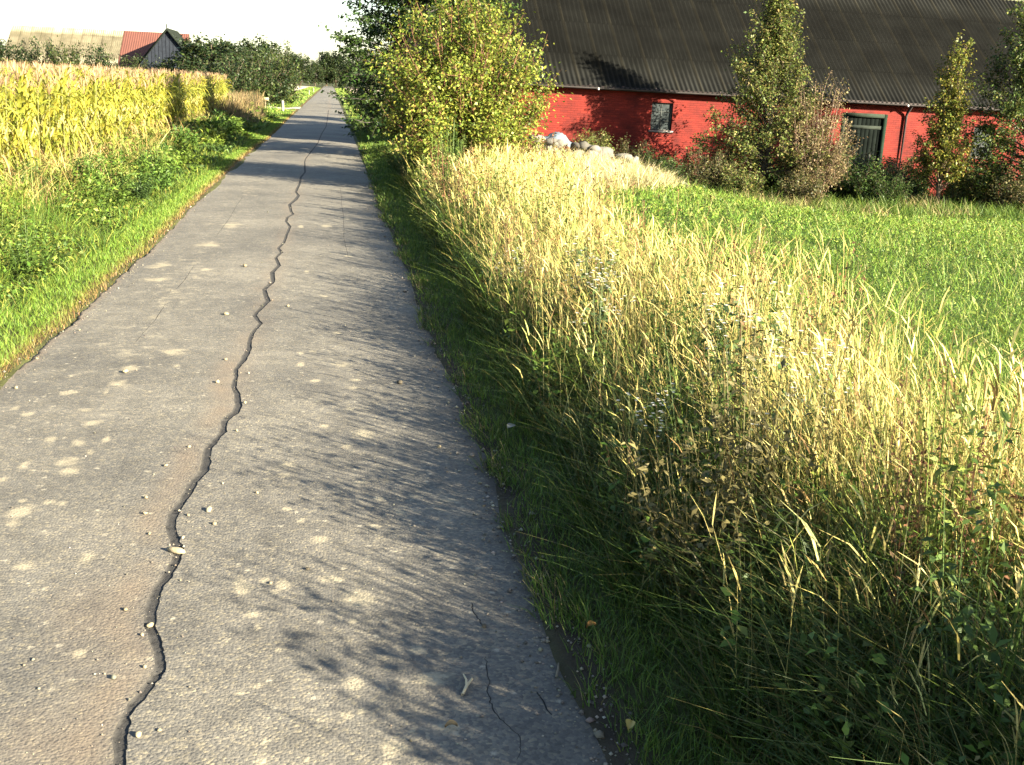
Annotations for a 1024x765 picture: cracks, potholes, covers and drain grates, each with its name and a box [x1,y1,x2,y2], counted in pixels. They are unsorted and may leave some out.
crack [112,110,329,765]
crack [485,657,521,759]
